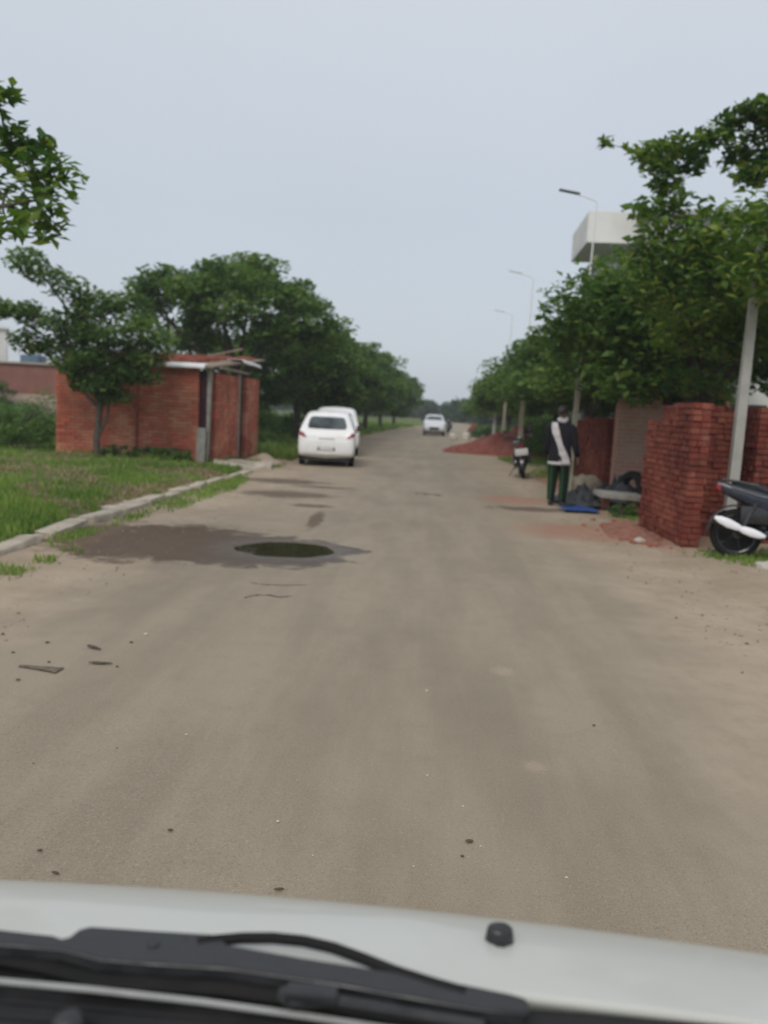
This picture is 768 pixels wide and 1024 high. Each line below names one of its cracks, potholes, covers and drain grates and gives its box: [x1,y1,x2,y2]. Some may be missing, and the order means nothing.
pothole [232,540,336,558]
crack [245,582,303,598]
